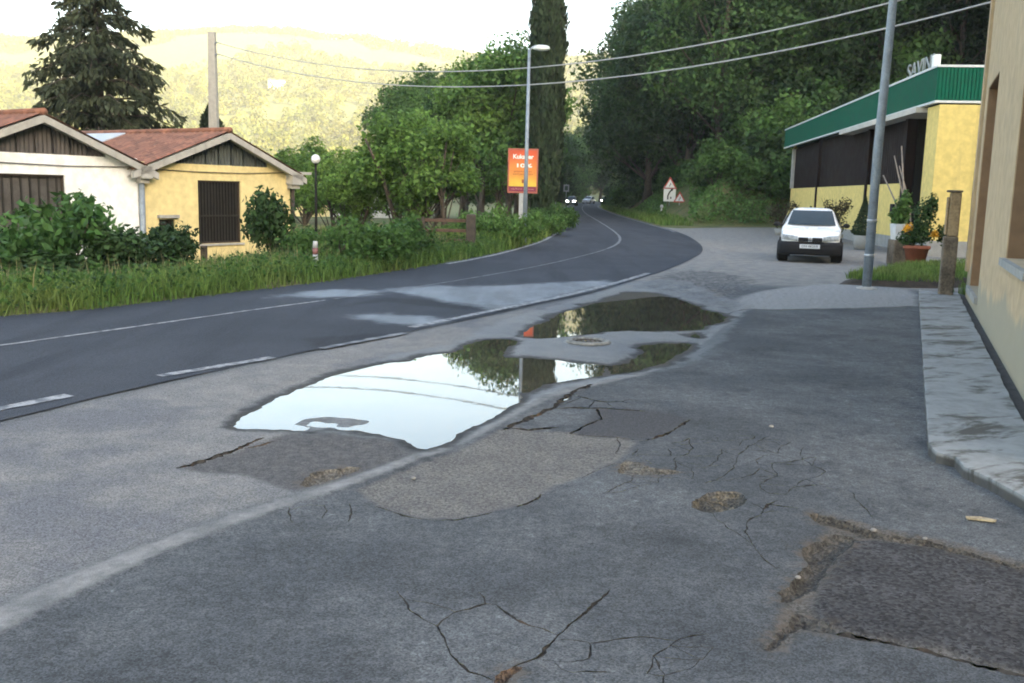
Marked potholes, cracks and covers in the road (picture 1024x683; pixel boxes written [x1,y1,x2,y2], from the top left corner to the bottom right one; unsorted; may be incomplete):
crack [398,589,713,683]
pothole [691,491,747,513]
pothole [617,462,682,477]
crack [288,504,352,523]
crack [713,503,784,569]
crack [504,385,871,515]
manhole cover [566,337,611,345]
pothole [300,467,362,487]
